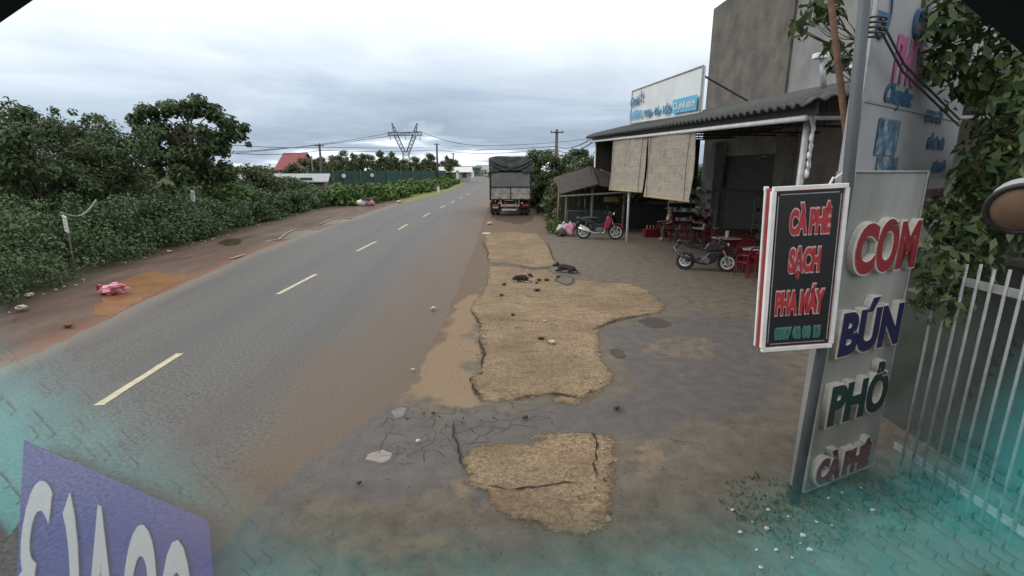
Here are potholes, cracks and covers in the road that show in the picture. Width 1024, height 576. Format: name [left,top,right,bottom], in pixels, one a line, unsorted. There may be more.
pothole [610,349,626,359]
pothole [638,317,672,328]
crack [374,312,601,489]
